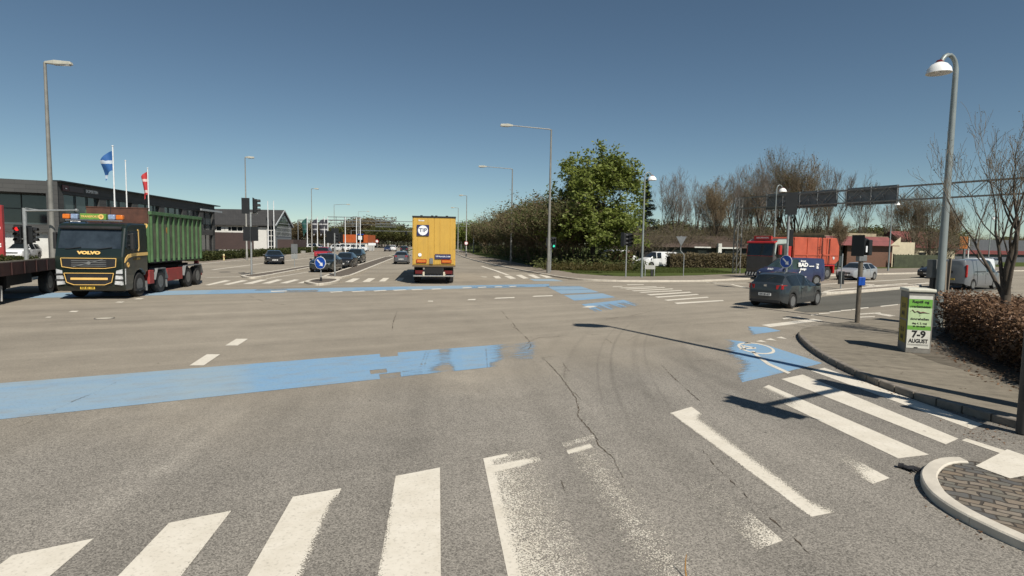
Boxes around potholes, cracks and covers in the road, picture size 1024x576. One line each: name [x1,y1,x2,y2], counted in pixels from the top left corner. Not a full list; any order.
crack [703,451,809,553]
crack [503,313,624,478]
